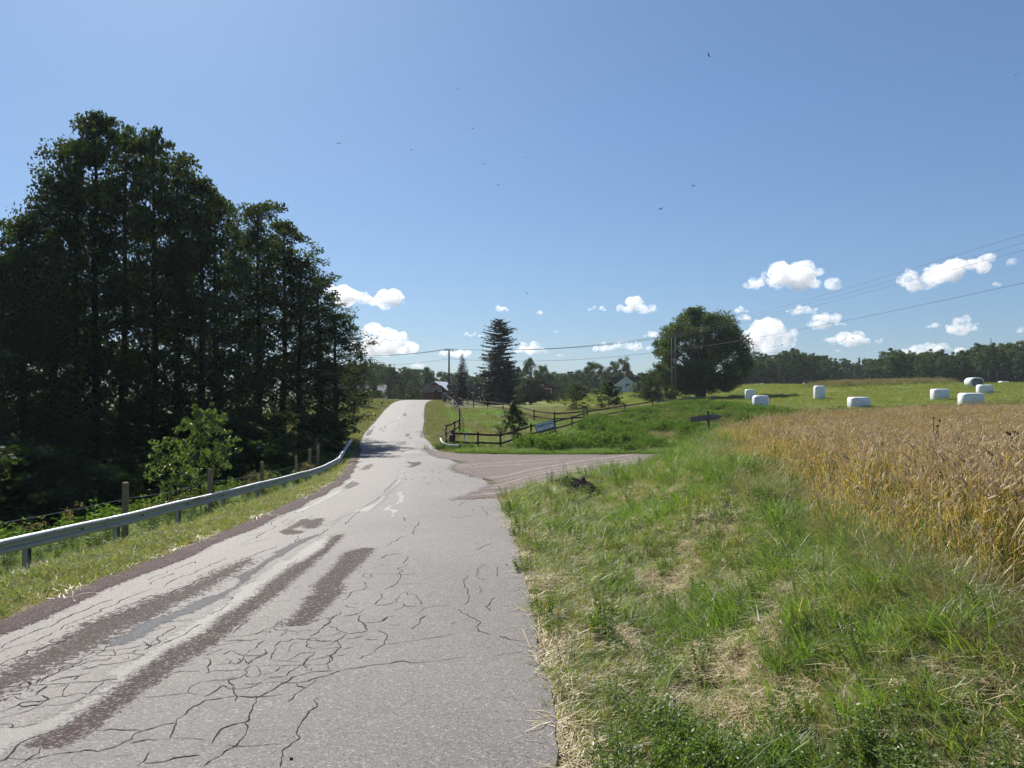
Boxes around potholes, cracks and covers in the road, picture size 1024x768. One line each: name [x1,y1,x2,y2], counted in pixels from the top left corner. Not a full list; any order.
crack [0,518,522,767]
